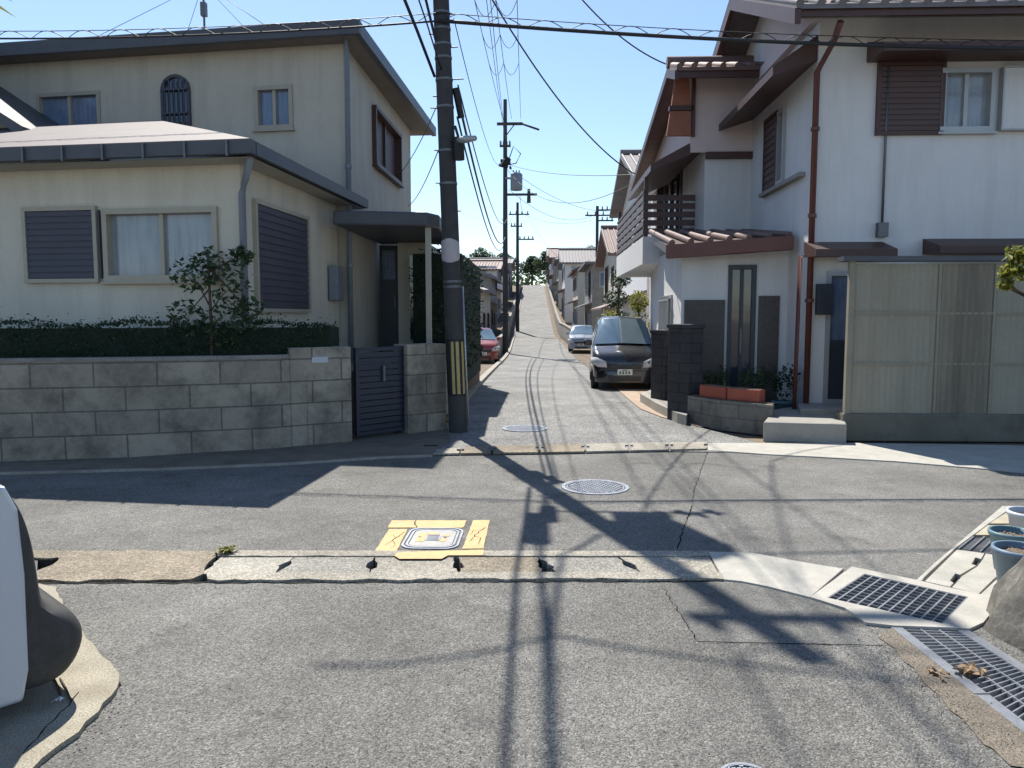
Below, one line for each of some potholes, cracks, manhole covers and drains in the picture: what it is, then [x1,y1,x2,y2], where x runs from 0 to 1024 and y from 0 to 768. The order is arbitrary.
crack [677,452,708,549]
drain grate [890,626,1024,732]
manhole cover [561,479,629,495]
drain grate [957,536,992,555]
drain grate [828,574,968,623]
